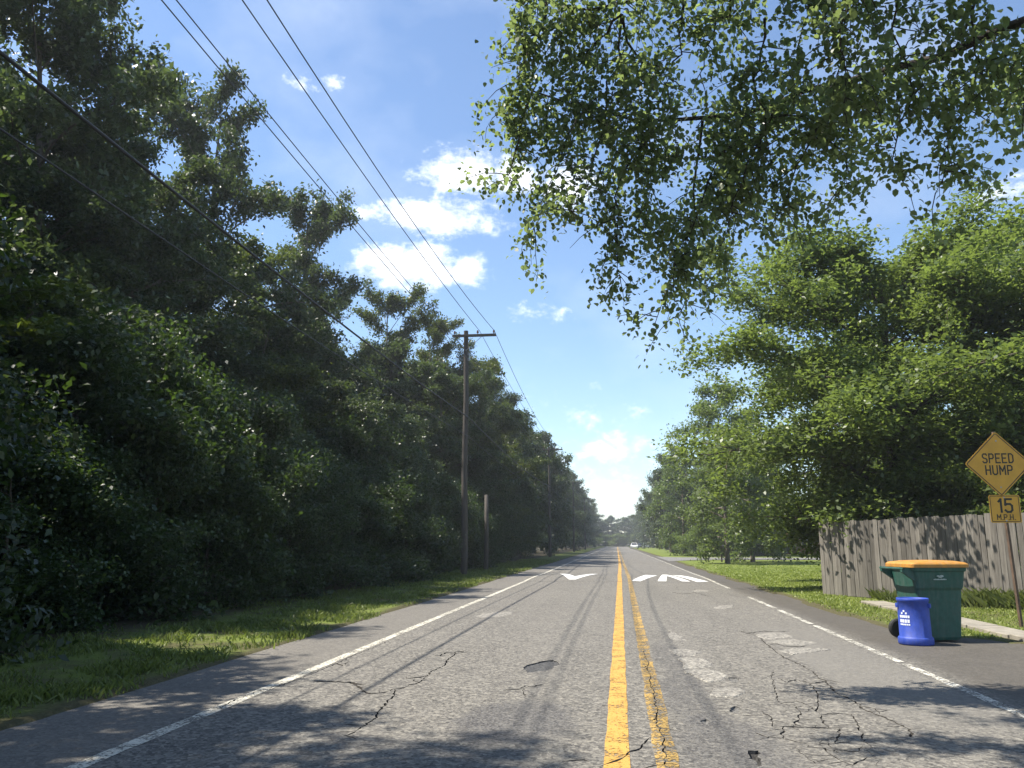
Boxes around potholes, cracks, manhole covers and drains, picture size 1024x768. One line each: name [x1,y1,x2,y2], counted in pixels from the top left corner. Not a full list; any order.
crack [225,641,466,739]
pothole [523,660,559,672]
crack [739,630,914,767]
pothole [748,750,762,766]
